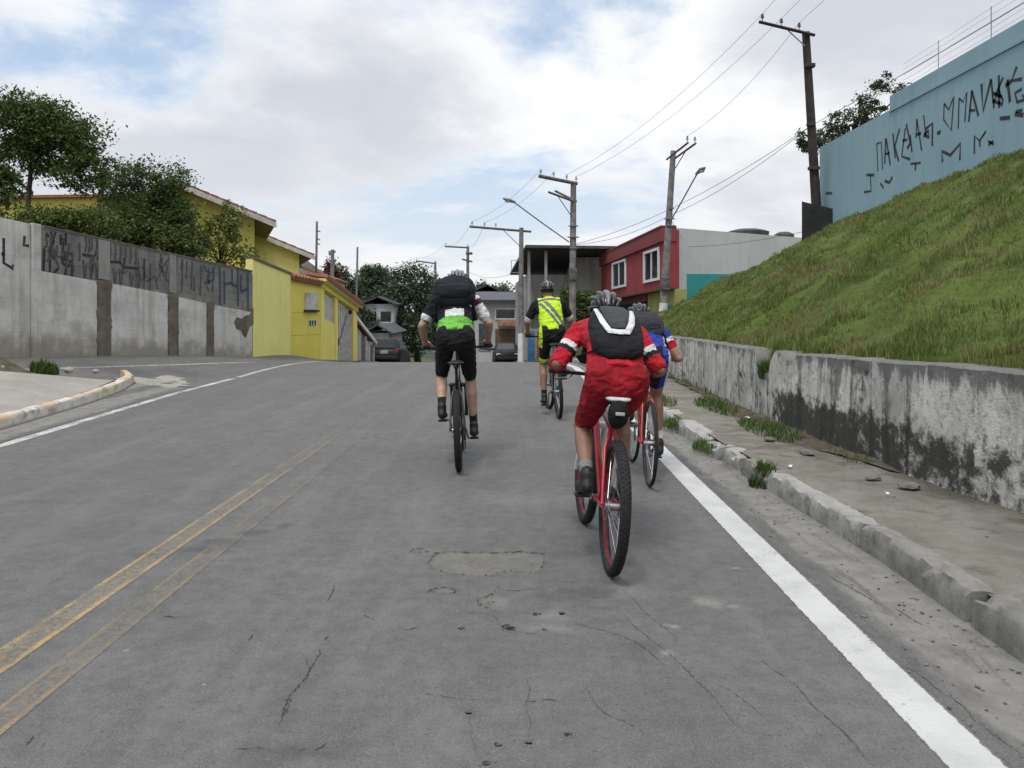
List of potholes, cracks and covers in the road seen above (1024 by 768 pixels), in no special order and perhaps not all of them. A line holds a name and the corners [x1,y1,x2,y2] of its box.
crack [279,587,335,723]
pothole [427,586,458,594]
crack [580,583,870,762]
